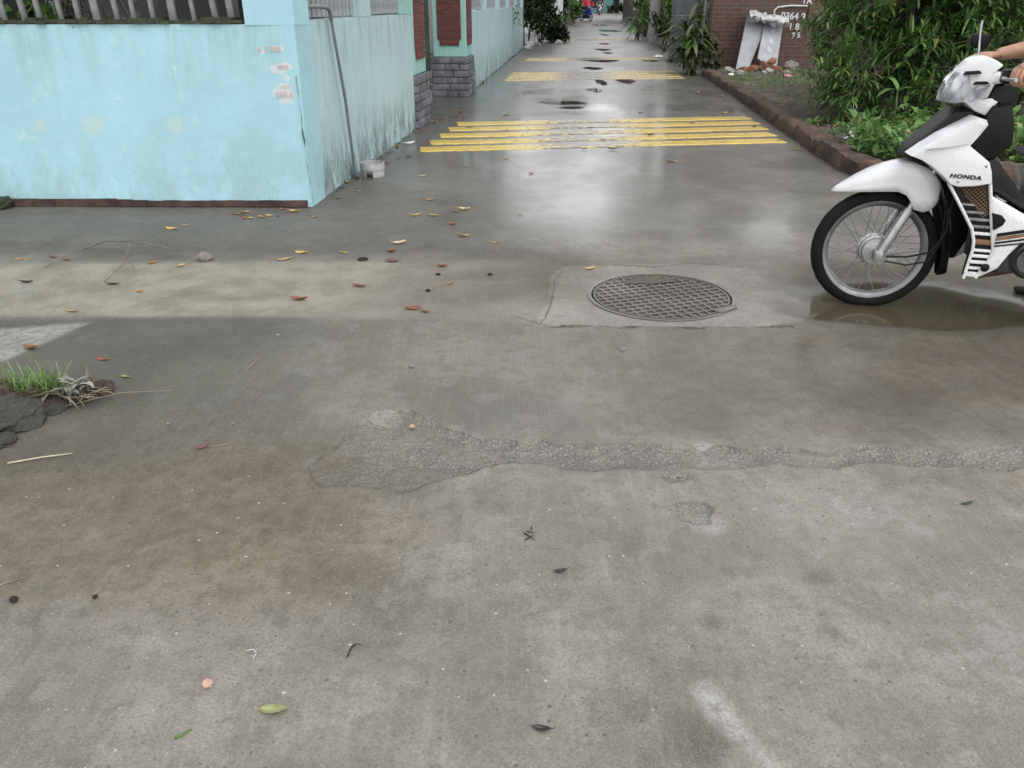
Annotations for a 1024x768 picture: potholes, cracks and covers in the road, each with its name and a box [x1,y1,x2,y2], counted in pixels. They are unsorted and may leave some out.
manhole cover [587,274,737,322]
